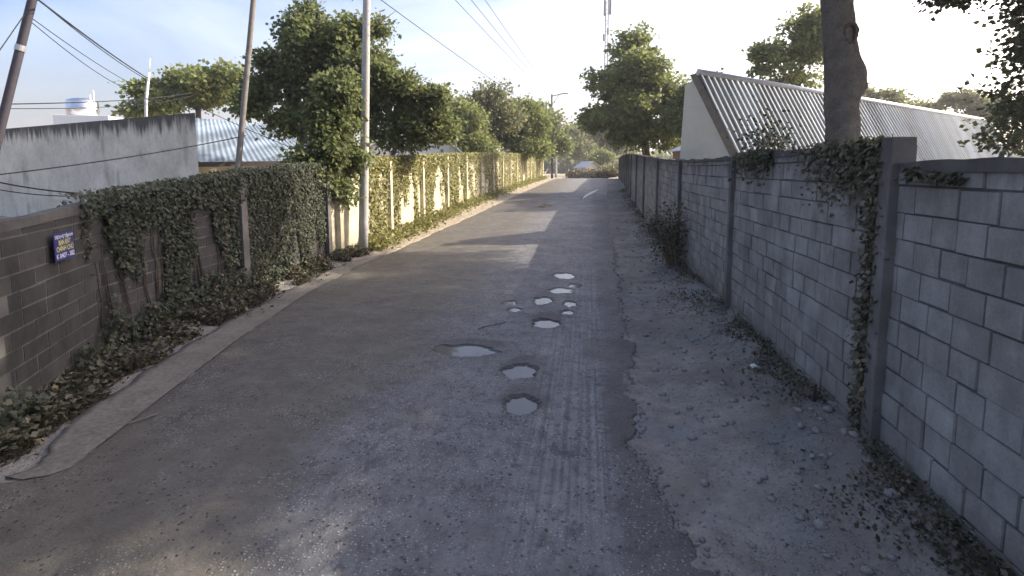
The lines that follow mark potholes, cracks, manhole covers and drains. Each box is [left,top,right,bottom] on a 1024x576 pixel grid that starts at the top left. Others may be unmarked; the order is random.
pothole [497,299,521,307]
pothole [427,342,507,359]
pothole [496,391,548,419]
pothole [526,317,566,329]
pothole [529,296,558,305]
crack [476,322,508,330]
pothole [549,272,578,280]
pothole [543,286,576,294]
pothole [494,361,544,382]
pothole [558,299,580,308]
